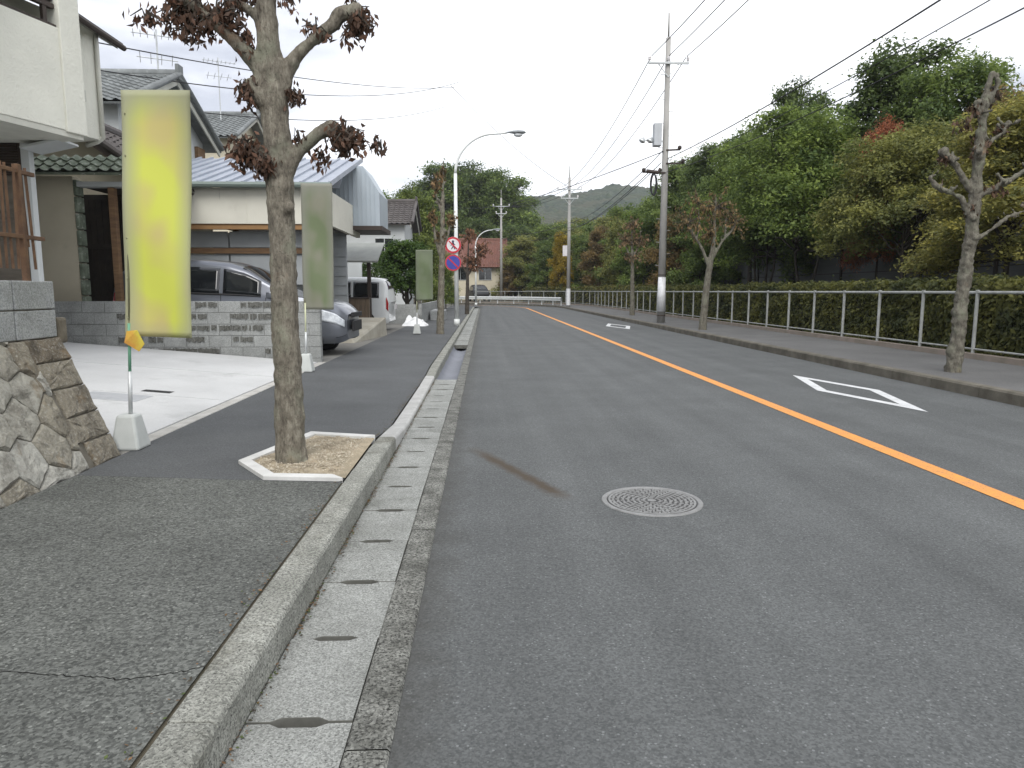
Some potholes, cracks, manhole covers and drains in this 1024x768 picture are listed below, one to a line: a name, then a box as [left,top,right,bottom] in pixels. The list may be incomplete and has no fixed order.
manhole cover [601,487,703,517]
crack [3,666,205,681]
